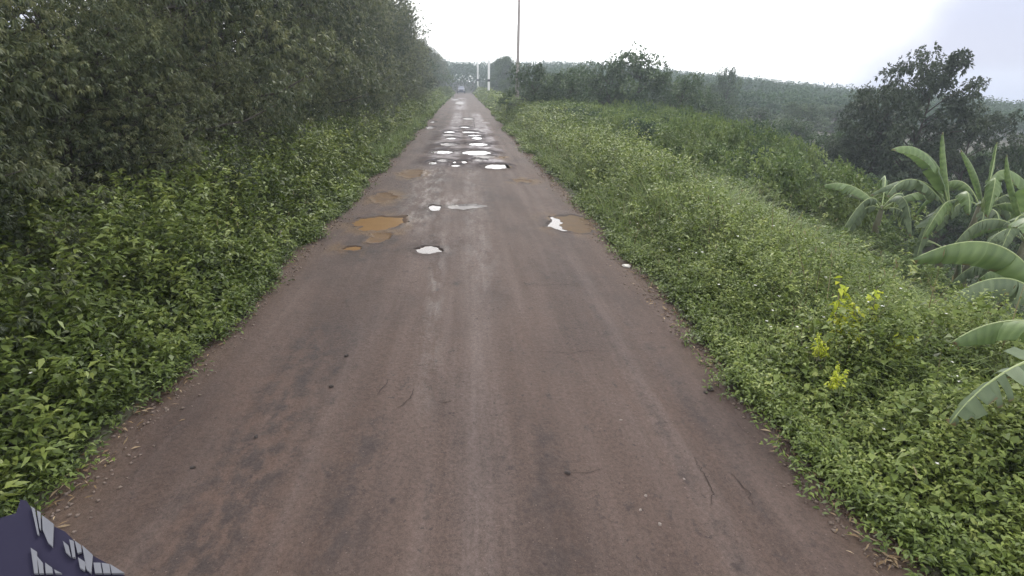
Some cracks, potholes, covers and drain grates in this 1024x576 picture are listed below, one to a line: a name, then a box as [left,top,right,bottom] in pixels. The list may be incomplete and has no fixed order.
pothole [539,214,601,235]
pothole [445,203,491,211]
pothole [345,215,412,232]
pothole [360,231,398,245]
pothole [423,203,445,212]
crack [694,457,753,503]
pothole [365,191,404,204]
pothole [336,244,368,252]
pothole [396,169,427,179]
pothole [408,244,450,256]
